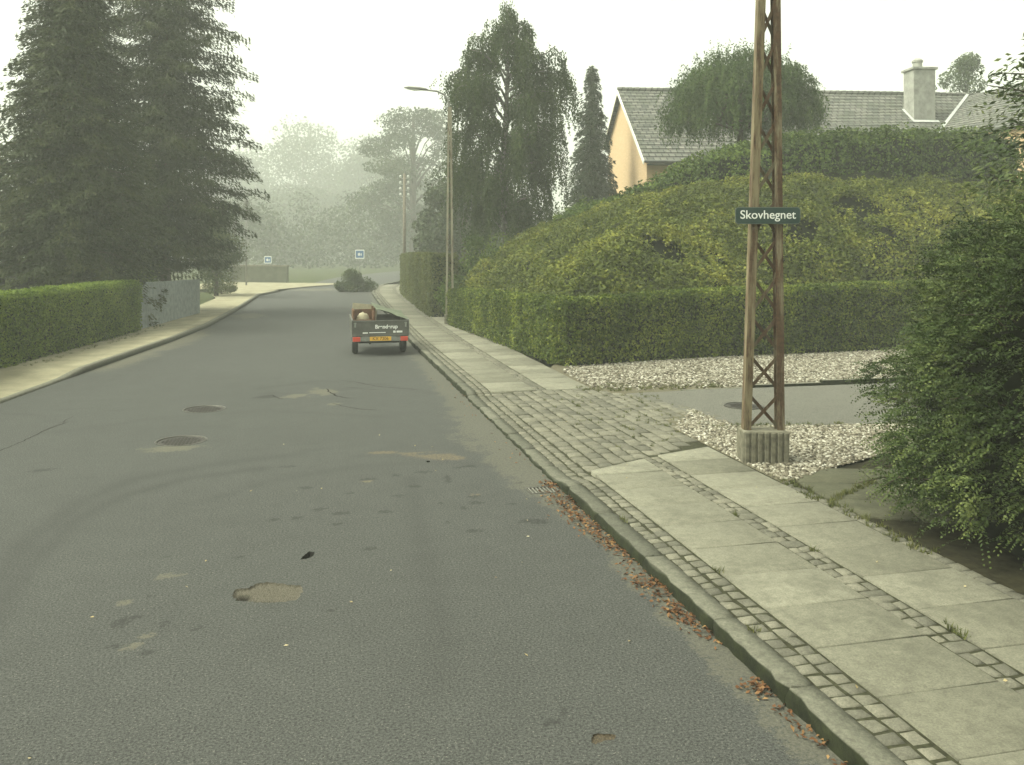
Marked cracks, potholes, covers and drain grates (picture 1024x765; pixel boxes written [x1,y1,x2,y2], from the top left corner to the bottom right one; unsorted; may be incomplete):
manhole cover [724,402,764,410]
pothole [232,582,303,603]
drain grate [524,486,559,494]
manhole cover [182,405,226,413]
manhole cover [154,435,208,446]
pothole [591,733,616,744]
